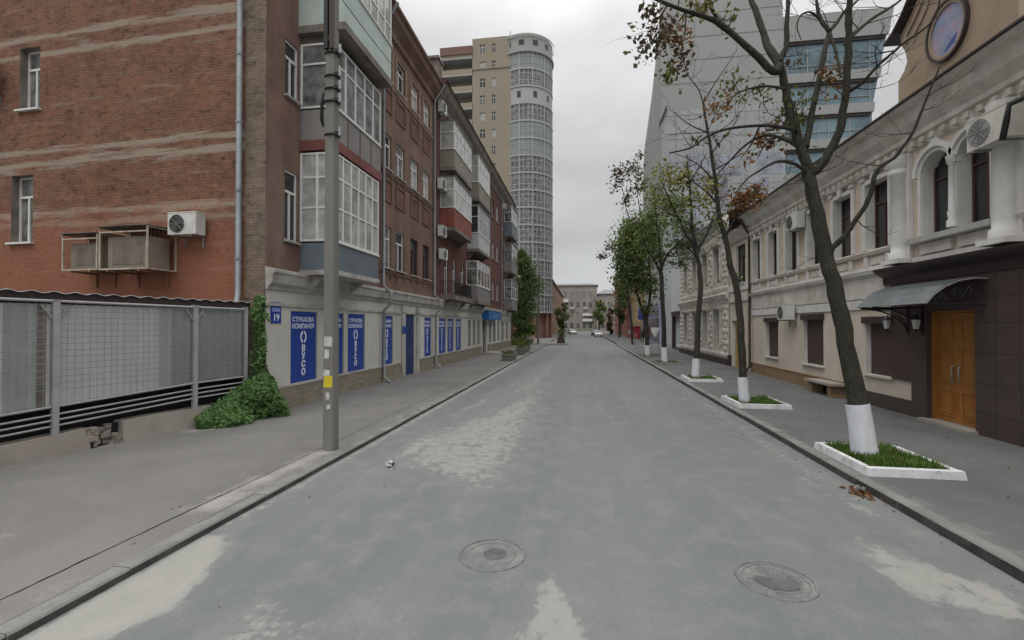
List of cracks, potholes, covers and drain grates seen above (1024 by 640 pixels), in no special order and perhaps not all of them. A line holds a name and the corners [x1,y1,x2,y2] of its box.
manhole cover [734,560,820,603]
manhole cover [459,538,526,573]
